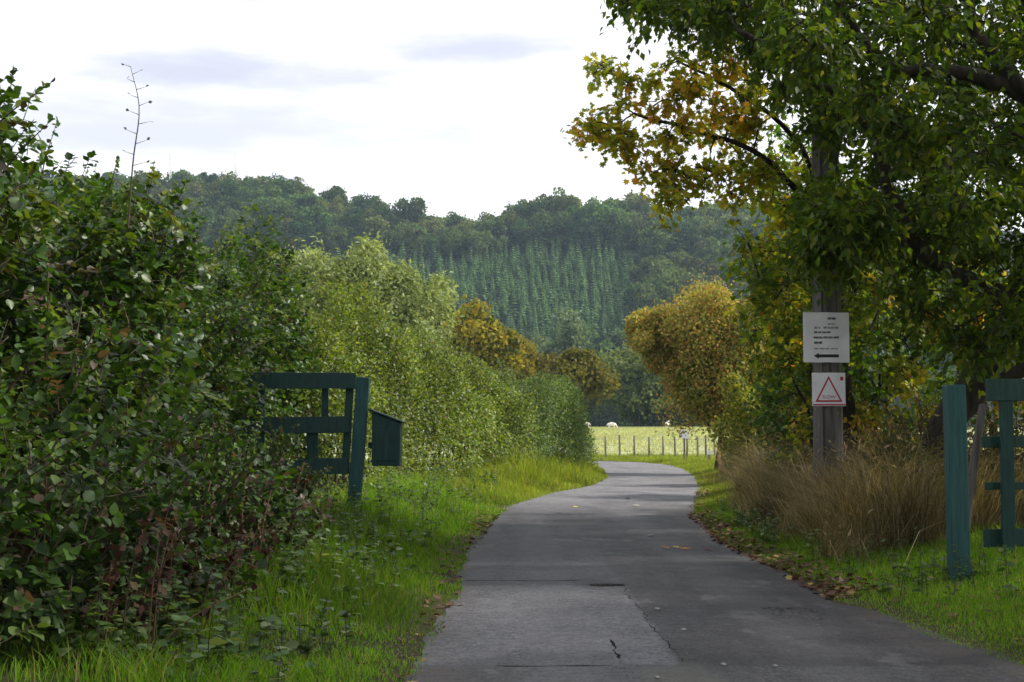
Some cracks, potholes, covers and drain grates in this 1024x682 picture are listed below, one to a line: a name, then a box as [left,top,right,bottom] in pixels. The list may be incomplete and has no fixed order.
crack [495,640,621,667]
crack [624,588,683,662]
